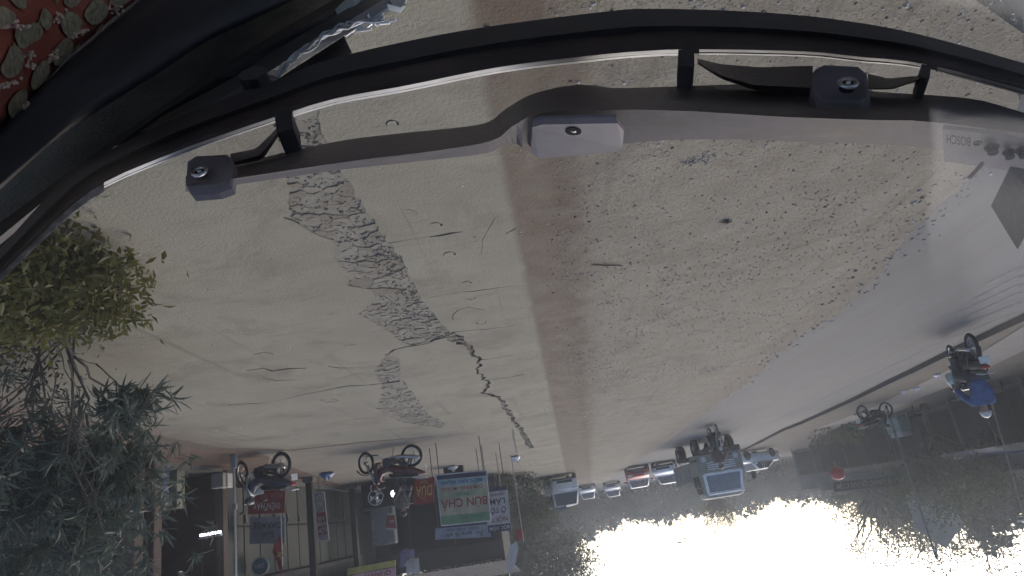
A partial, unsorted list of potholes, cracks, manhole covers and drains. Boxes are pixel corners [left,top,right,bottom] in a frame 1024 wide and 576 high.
crack [231,109,534,448]
